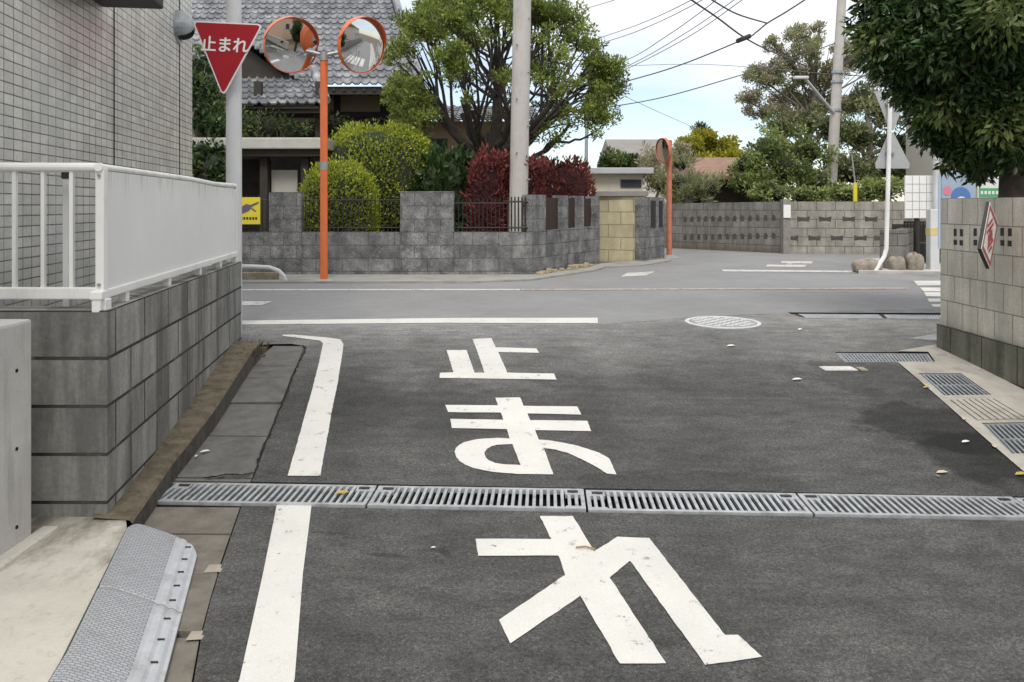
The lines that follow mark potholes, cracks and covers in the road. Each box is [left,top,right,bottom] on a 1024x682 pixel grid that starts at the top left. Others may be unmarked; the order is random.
drain grate [157,483,377,508]
drain grate [837,353,933,366]
drain grate [983,423,1024,454]
drain grate [797,493,1024,521]
drain grate [367,486,586,512]
drain grate [920,374,990,395]
crack [203,345,306,478]
drain grate [586,490,813,517]
manhole cover [685,316,761,329]
